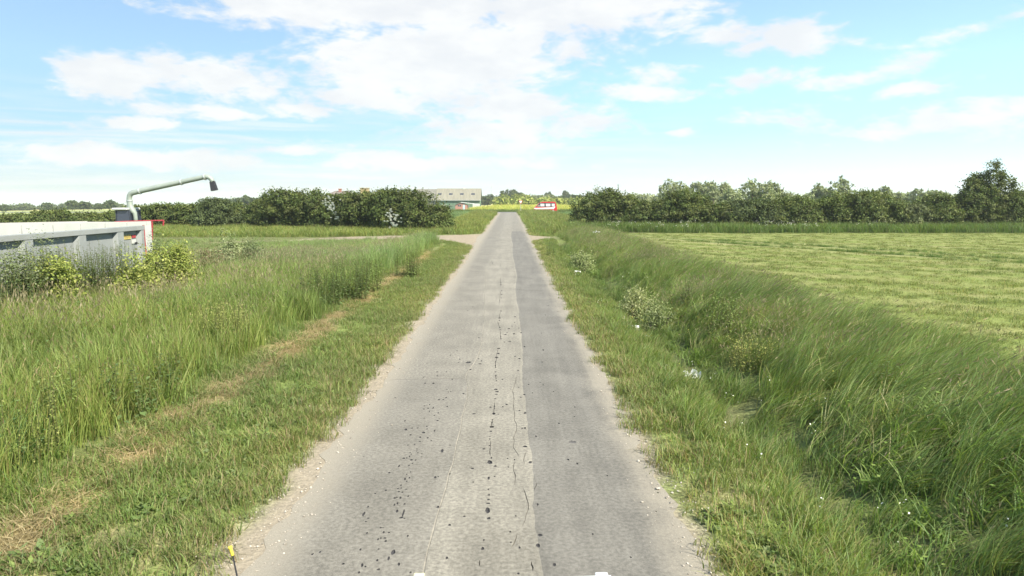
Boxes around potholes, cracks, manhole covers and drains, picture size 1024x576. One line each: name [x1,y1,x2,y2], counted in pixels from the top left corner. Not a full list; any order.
crack [423,265,501,573]
crack [512,377,537,570]
